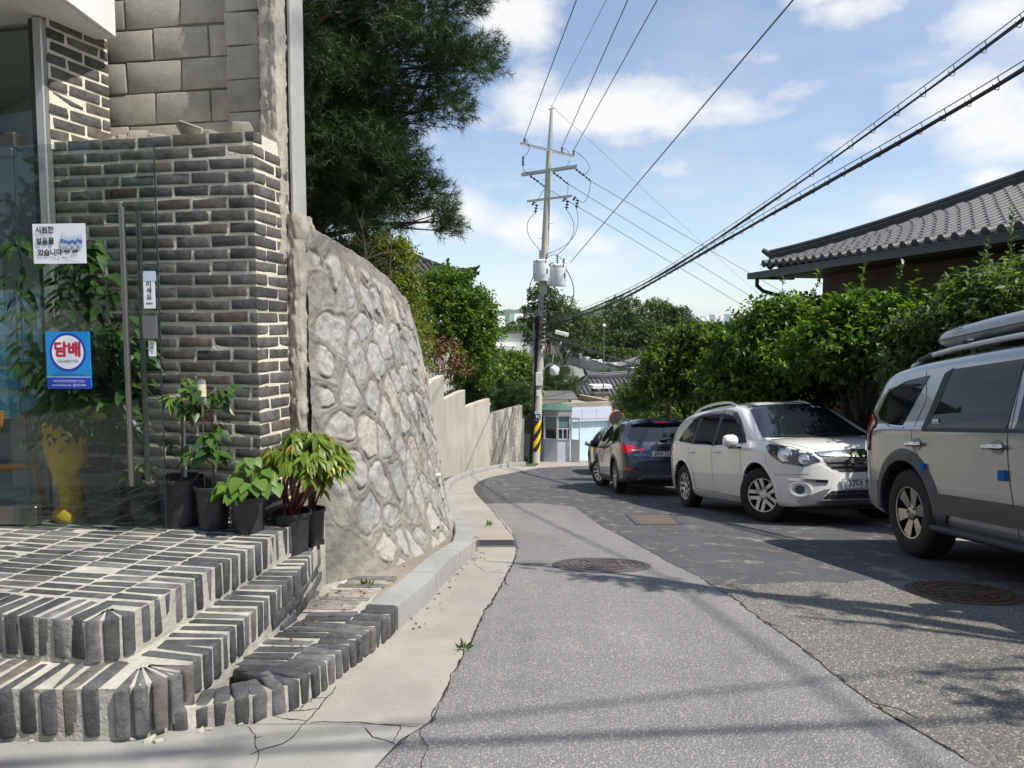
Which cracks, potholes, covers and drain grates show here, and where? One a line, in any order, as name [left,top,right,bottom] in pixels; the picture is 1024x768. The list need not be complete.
manhole cover [905,580,1024,606]
manhole cover [552,558,651,573]
crack [249,686,429,768]
manhole cover [625,514,684,525]
